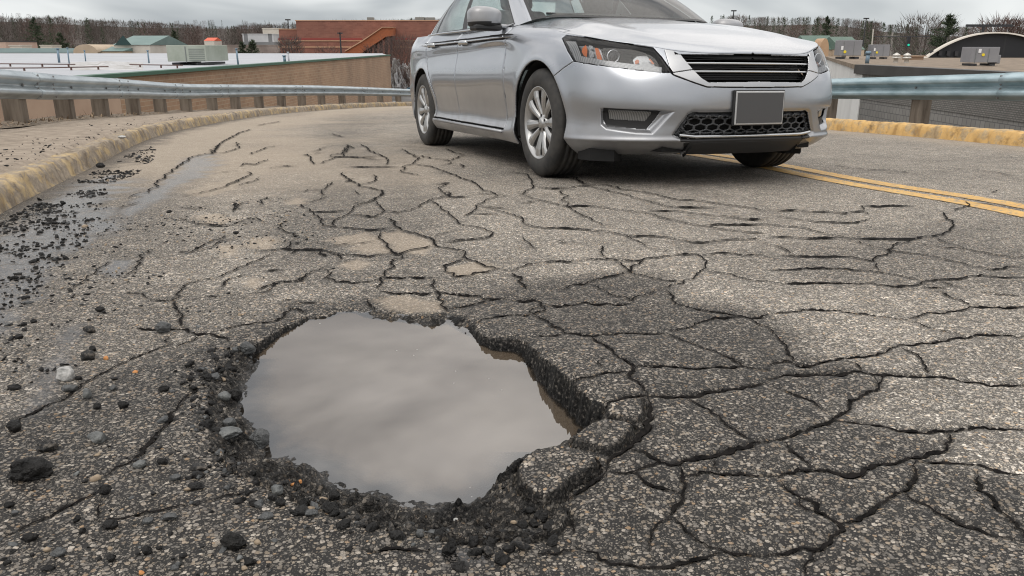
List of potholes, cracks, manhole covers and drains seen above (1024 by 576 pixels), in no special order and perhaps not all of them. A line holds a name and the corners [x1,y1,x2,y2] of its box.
crack [0,121,1024,574]
pothole [203,310,604,545]
